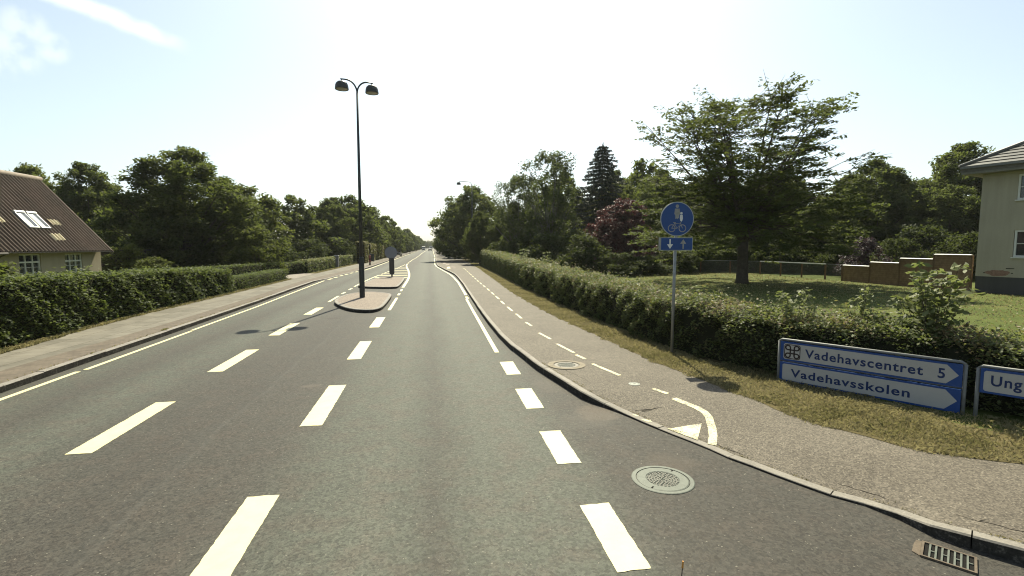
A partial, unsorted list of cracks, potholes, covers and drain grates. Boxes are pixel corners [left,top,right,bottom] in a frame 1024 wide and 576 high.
manhole cover [547,360,586,370]
manhole cover [631,466,695,495]
drain grate [912,540,978,575]
